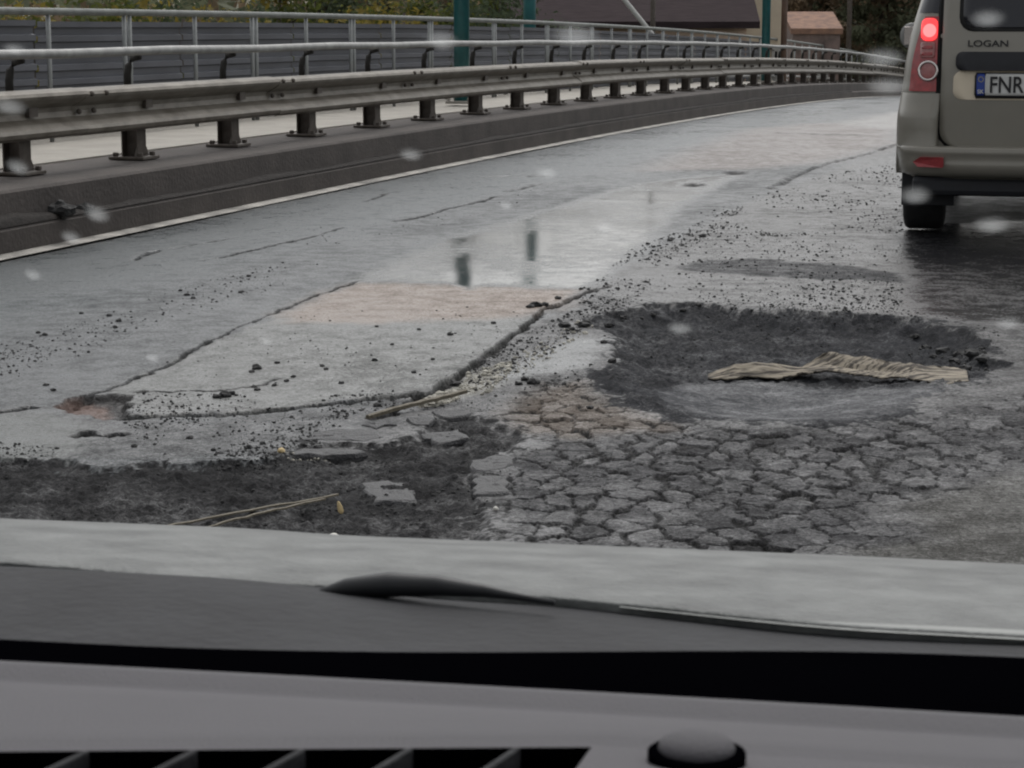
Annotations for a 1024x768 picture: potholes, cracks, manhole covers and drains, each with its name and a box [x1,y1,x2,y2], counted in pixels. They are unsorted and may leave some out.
crack [75,285,612,439]
crack [479,375,1024,555]
pothole [0,416,526,541]
pothole [581,301,1015,430]
pothole [54,393,136,421]
